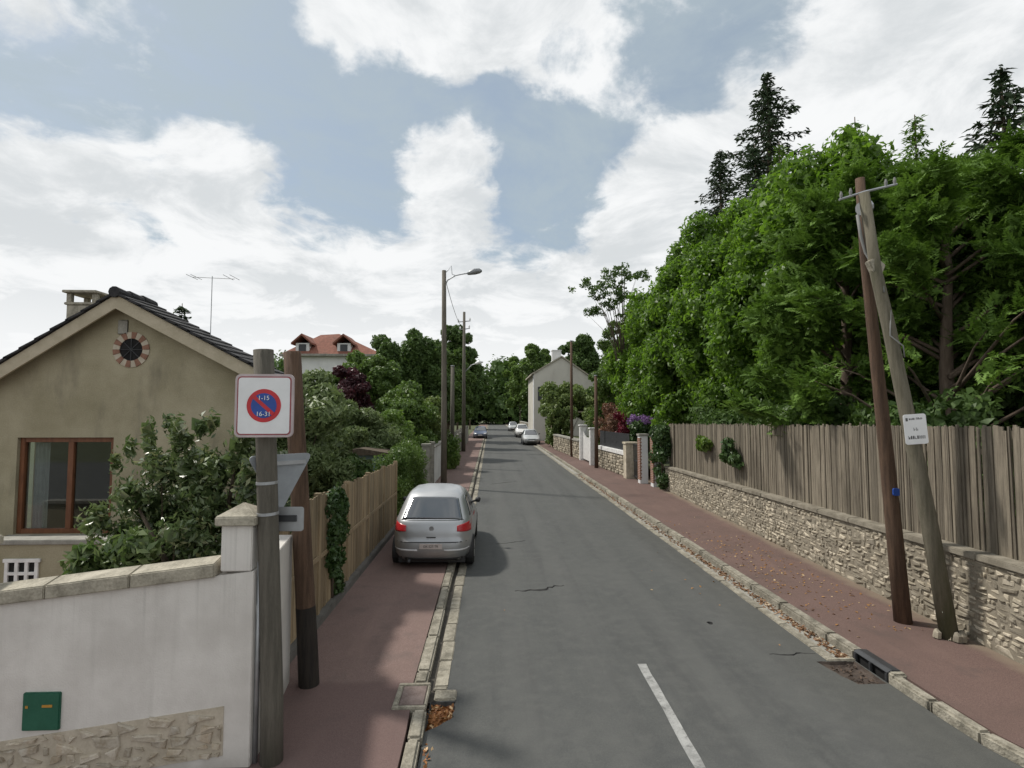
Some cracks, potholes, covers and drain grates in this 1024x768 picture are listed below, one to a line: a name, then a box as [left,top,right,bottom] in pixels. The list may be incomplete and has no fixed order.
pothole [425,701,456,731]
drain grate [818,649,907,684]
